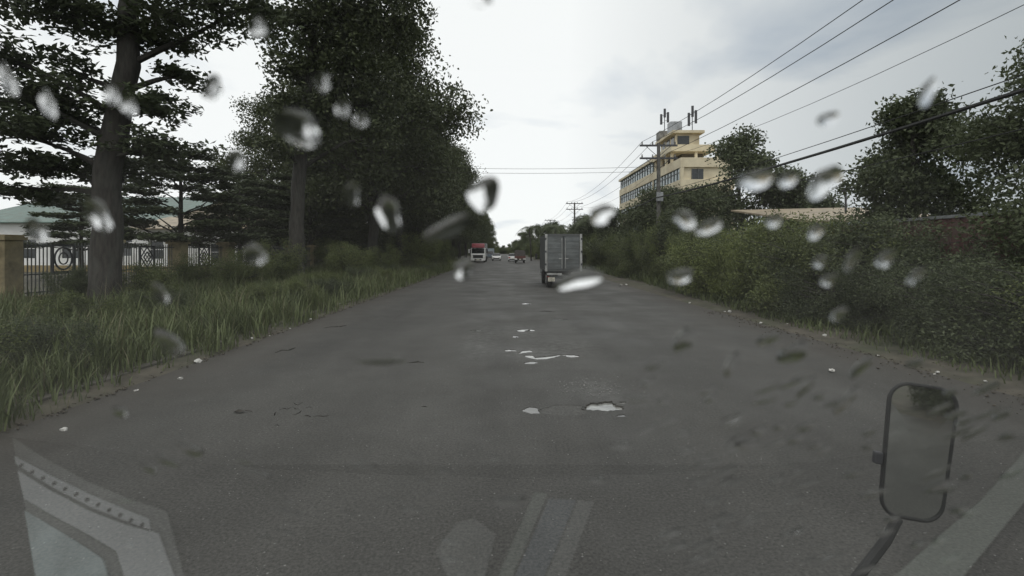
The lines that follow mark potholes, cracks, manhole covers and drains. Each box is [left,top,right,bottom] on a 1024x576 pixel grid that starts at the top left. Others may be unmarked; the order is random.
pothole [581,401,624,411]
